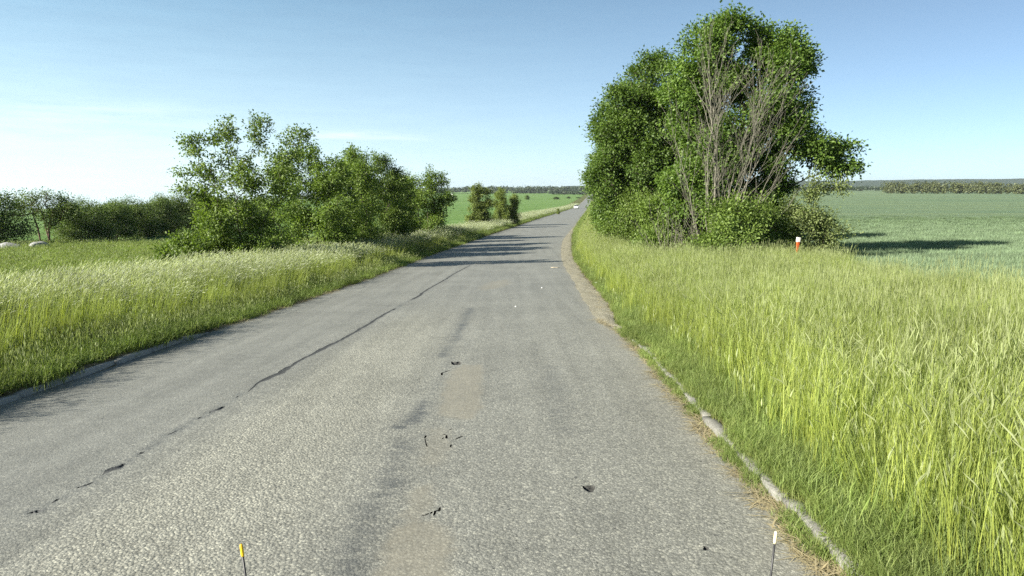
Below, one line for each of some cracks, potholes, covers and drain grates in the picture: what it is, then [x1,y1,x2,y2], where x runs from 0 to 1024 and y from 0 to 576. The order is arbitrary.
crack [27,266,469,514]
